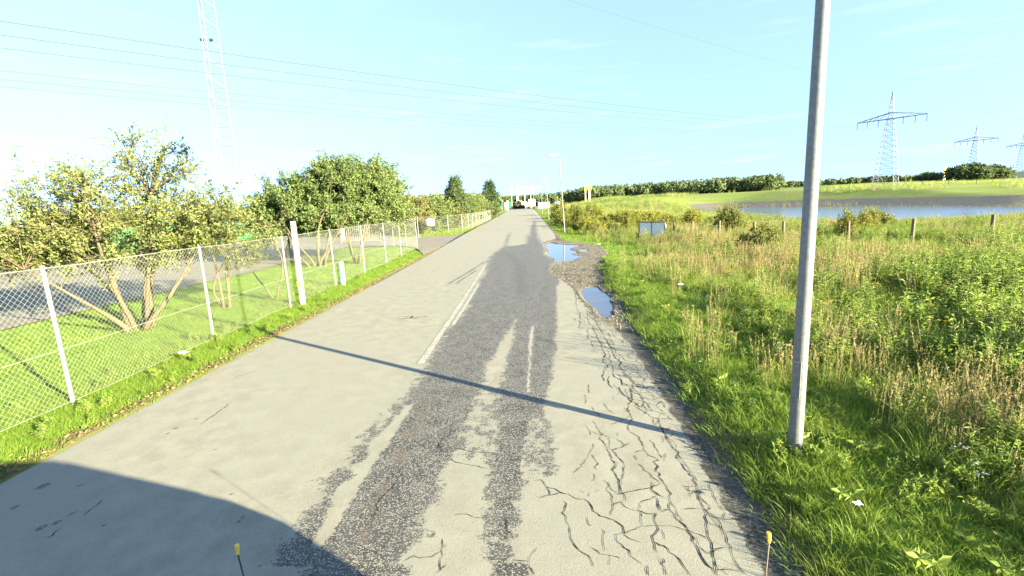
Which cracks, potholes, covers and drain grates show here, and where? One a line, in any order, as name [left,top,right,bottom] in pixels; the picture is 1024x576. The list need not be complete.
crack [542,389,760,575]
pothole [576,286,617,318]
pothole [541,242,590,263]
crack [565,275,666,415]
